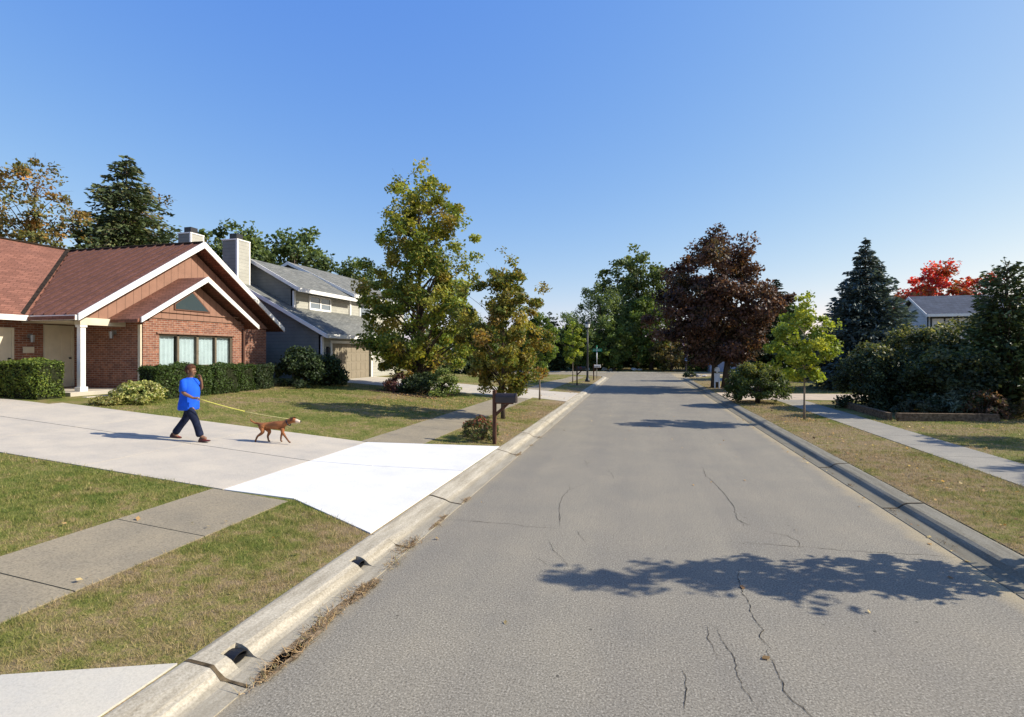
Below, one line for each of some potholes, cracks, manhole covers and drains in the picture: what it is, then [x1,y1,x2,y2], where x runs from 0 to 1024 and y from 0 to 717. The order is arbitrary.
crack [707,627,759,708]
crack [738,573,806,710]
